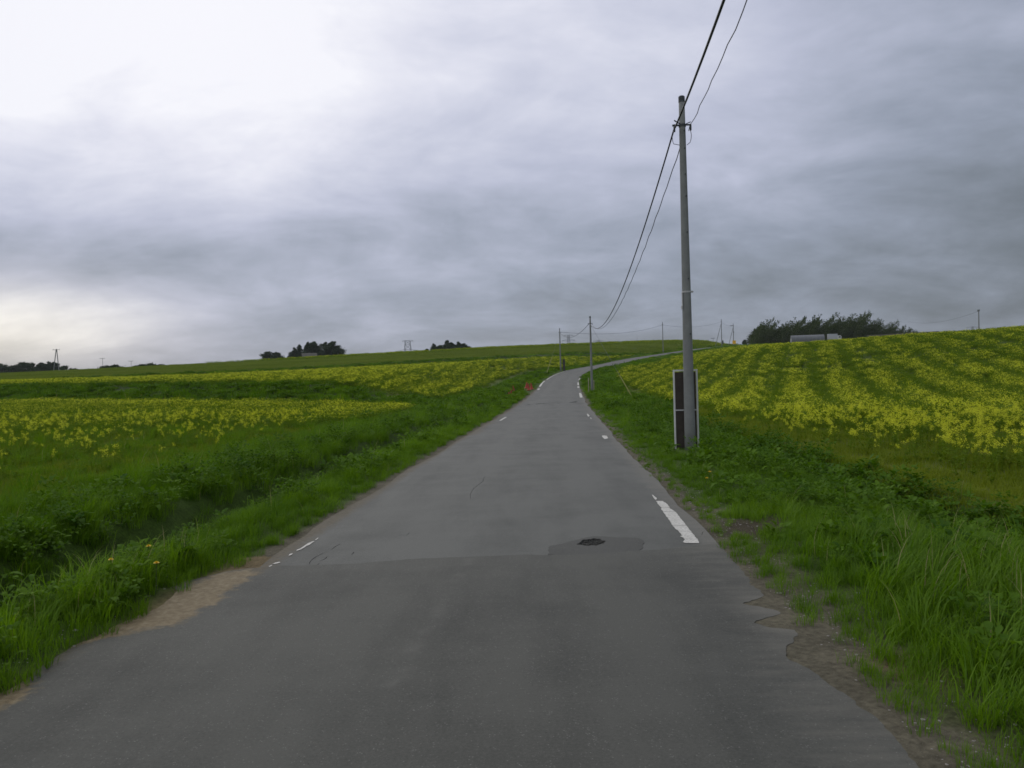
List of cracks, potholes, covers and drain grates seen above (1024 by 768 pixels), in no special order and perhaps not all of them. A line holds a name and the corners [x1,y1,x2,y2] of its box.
pothole [578,538,605,546]
